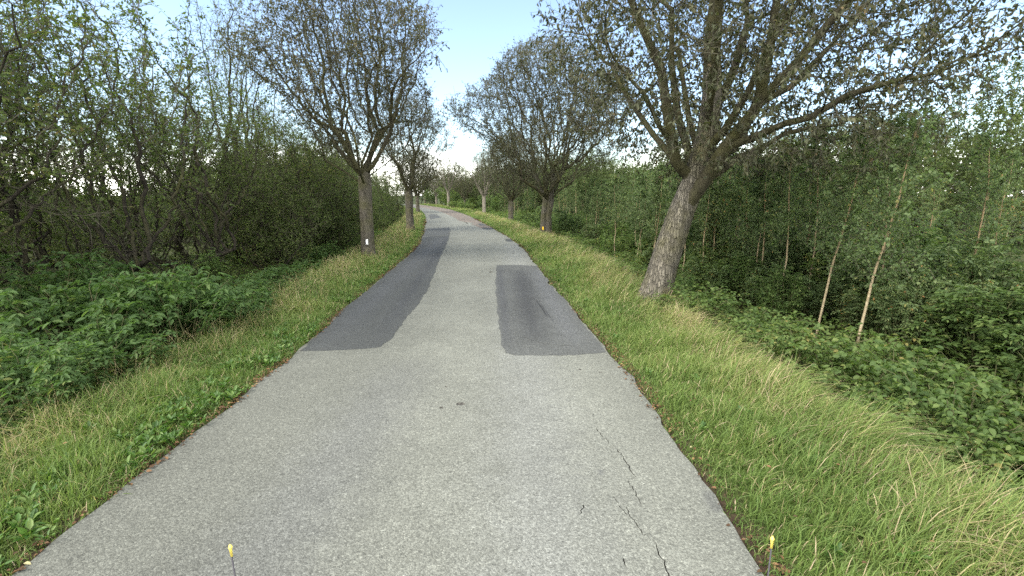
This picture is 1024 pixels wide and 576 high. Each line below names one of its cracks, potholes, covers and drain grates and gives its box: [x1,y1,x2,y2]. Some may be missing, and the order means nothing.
crack [592,413,670,576]
